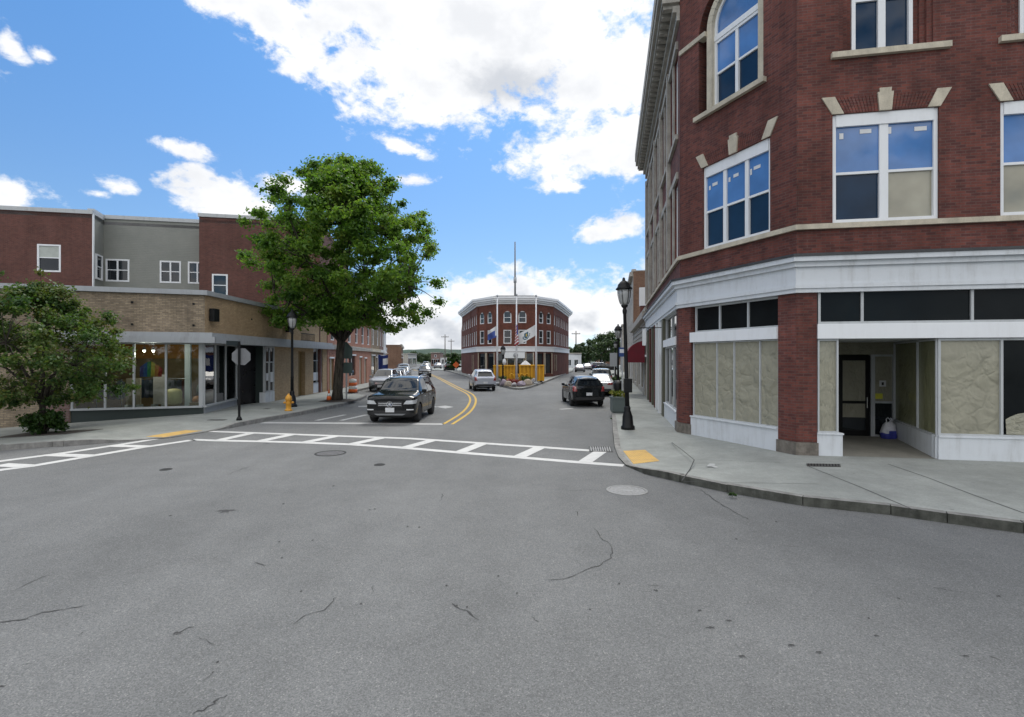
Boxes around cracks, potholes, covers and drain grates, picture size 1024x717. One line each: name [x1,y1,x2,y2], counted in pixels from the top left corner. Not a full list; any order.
crack [551,530,613,580]
manhole cover [606,485,648,496]
